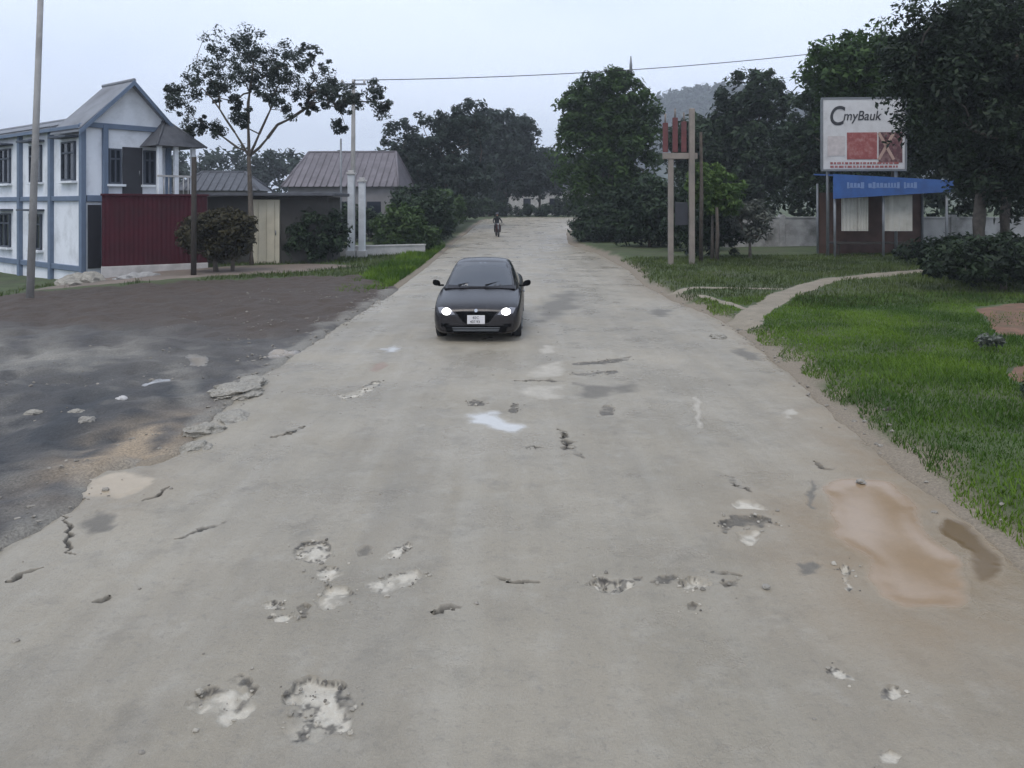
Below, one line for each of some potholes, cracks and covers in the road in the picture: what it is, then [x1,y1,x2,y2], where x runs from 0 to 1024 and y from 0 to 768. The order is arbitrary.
pothole [312,566,346,581]
pothole [717,513,780,534]
pothole [268,674,358,752]
crack [61,516,77,555]
crack [525,429,586,459]
pothole [296,602,312,615]
pothole [183,671,260,732]
pothole [839,561,854,594]
pothole [585,576,645,595]
pothole [312,585,357,611]
pothole [649,573,678,584]
crack [174,521,227,539]
